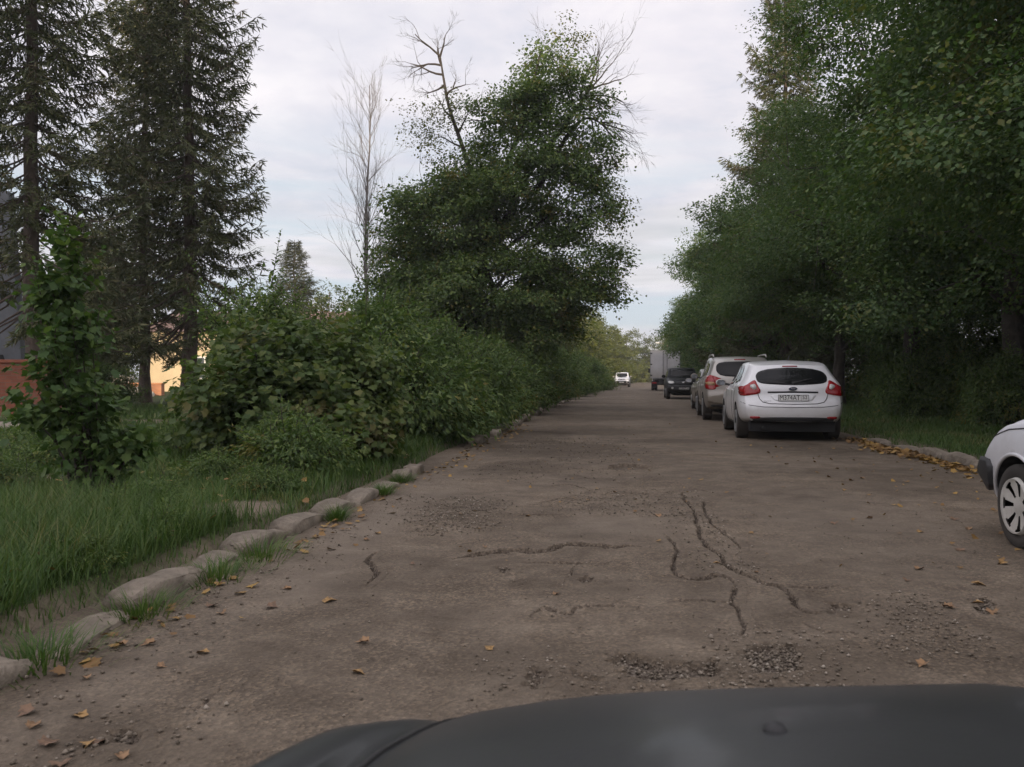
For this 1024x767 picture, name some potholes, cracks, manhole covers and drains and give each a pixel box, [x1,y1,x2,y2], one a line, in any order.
pothole [505,660,567,696]
pothole [724,636,830,682]
crack [442,483,873,642]
pothole [589,649,740,688]
crack [354,548,393,589]
